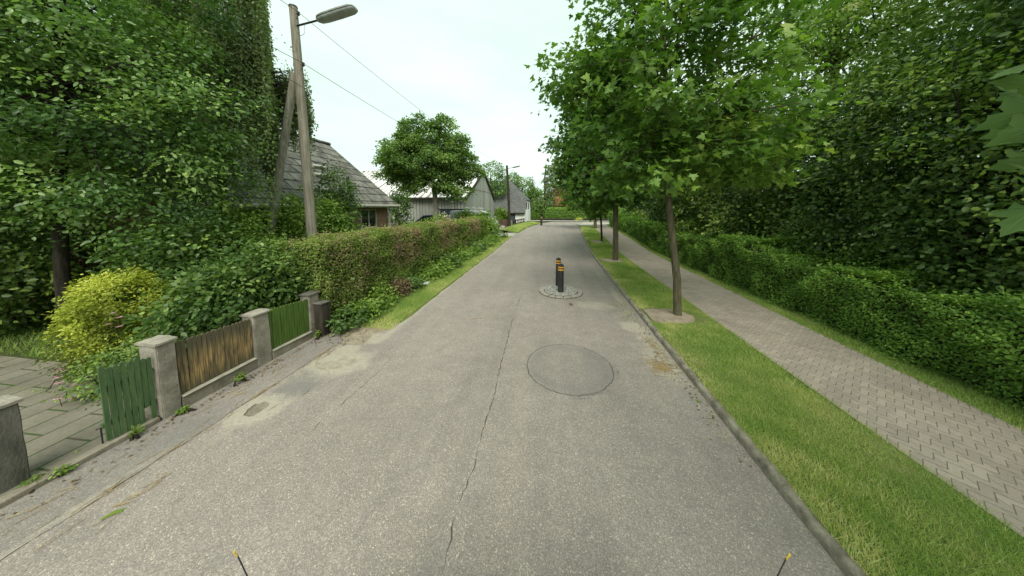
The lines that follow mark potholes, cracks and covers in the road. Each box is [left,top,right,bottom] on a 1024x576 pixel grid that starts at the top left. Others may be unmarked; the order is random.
pothole [244,402,269,417]
crack [441,518,454,576]
crack [459,299,520,503]
